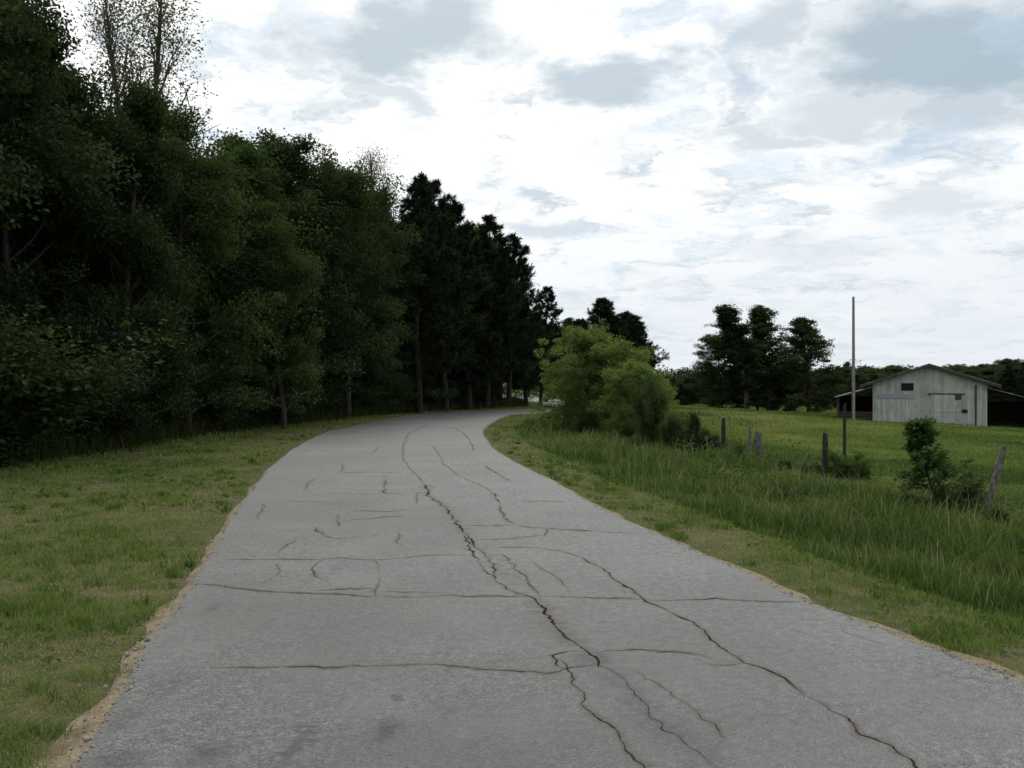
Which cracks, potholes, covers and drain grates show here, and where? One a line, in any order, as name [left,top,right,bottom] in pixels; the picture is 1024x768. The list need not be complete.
crack [205,429,918,768]
